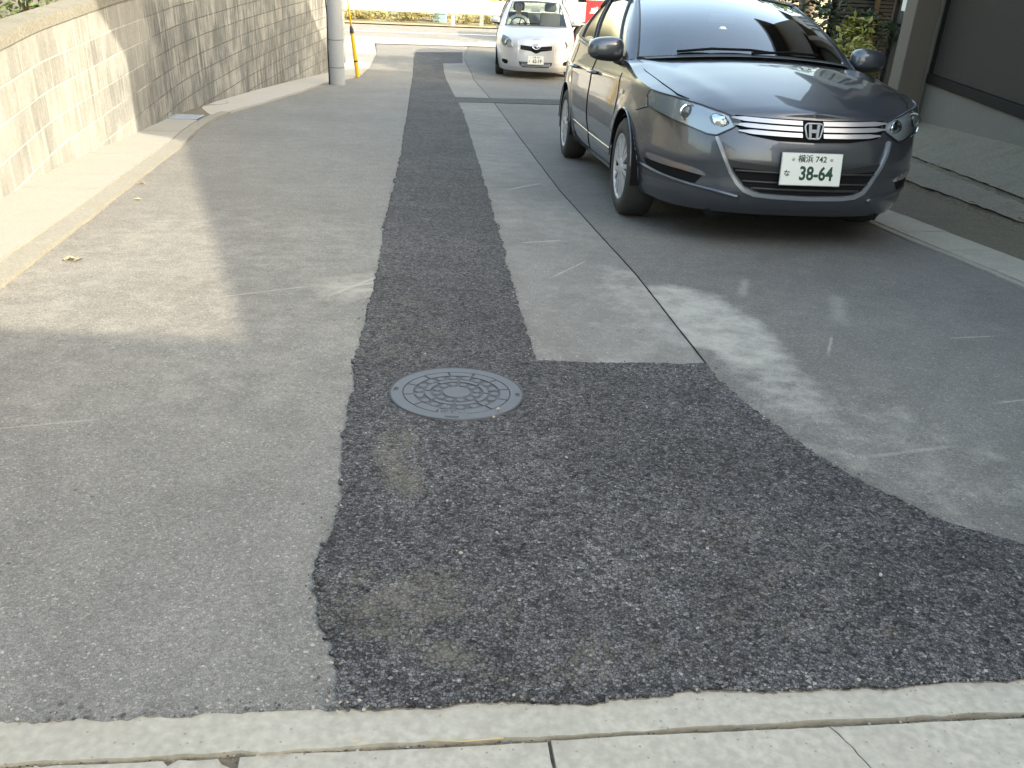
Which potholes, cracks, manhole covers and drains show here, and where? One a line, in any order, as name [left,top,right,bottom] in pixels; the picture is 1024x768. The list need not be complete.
manhole cover [389,367,523,421]
